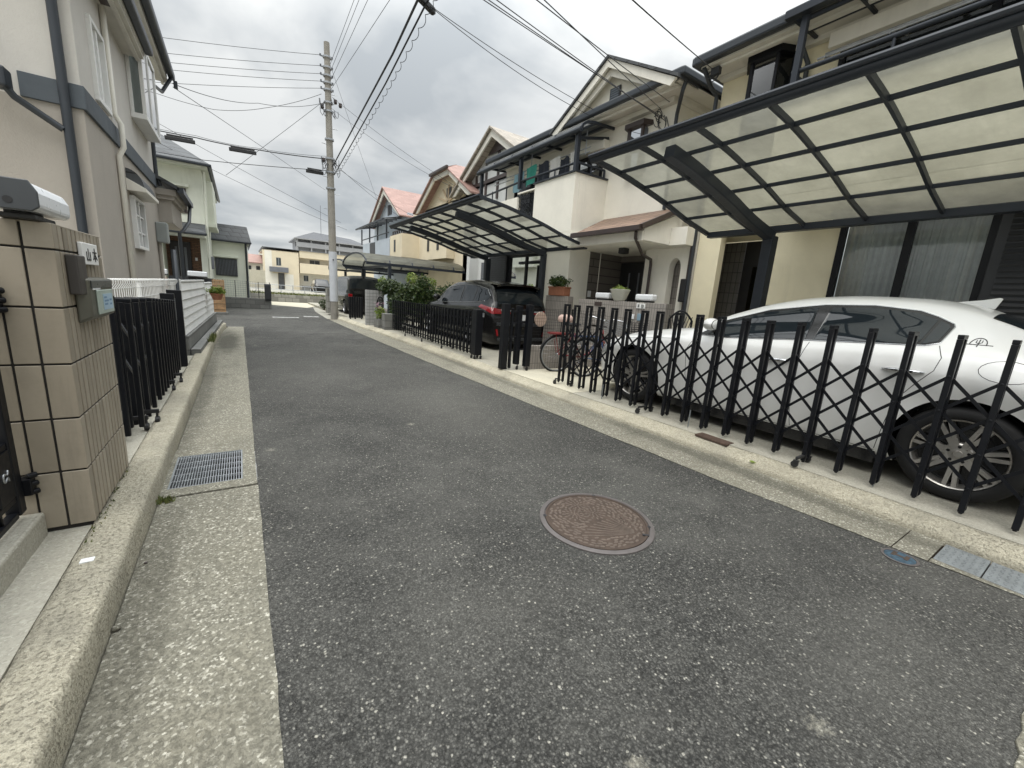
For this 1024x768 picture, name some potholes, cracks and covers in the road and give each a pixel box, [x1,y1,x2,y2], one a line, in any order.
drain grate [167,449,243,490]
manhole cover [540,493,655,556]
utility cover [880,548,920,567]
